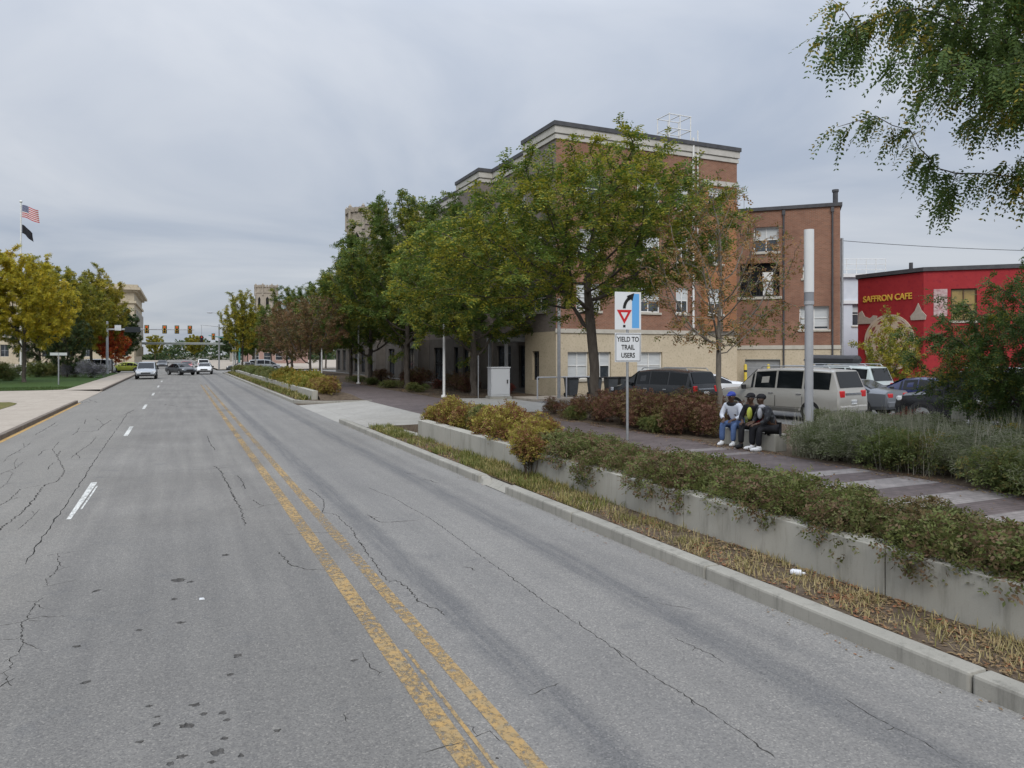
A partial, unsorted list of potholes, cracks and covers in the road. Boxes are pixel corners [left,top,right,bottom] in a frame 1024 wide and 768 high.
crack [299,489,444,615]
crack [0,399,111,530]
crack [170,436,271,524]
crack [370,488,775,758]
crack [0,551,75,687]
crack [845,698,962,764]
